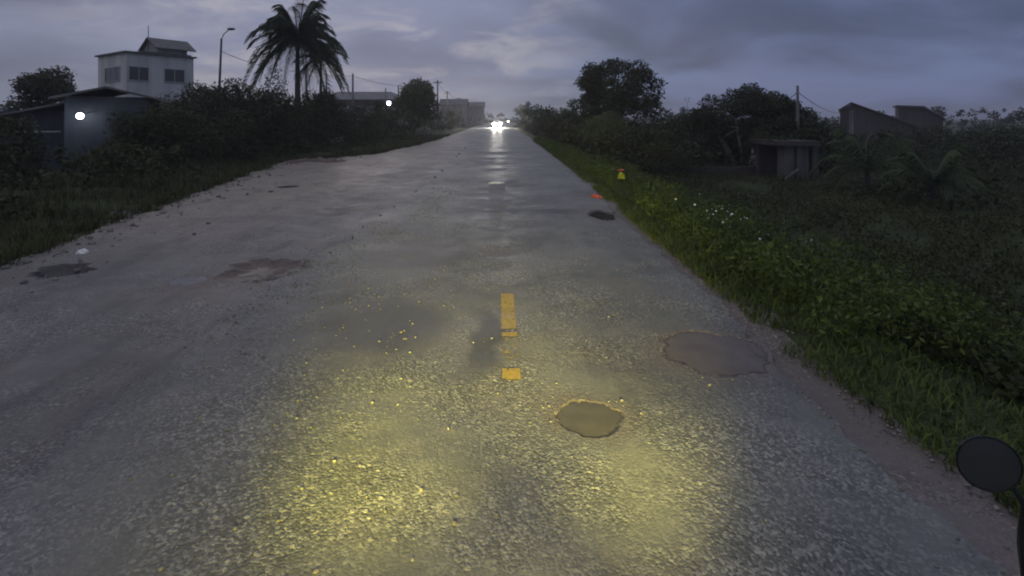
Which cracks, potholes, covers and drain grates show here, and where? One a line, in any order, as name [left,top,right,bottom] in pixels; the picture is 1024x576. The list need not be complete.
pothole [587,210,618,221]
pothole [25,263,98,279]
pothole [212,258,302,281]
